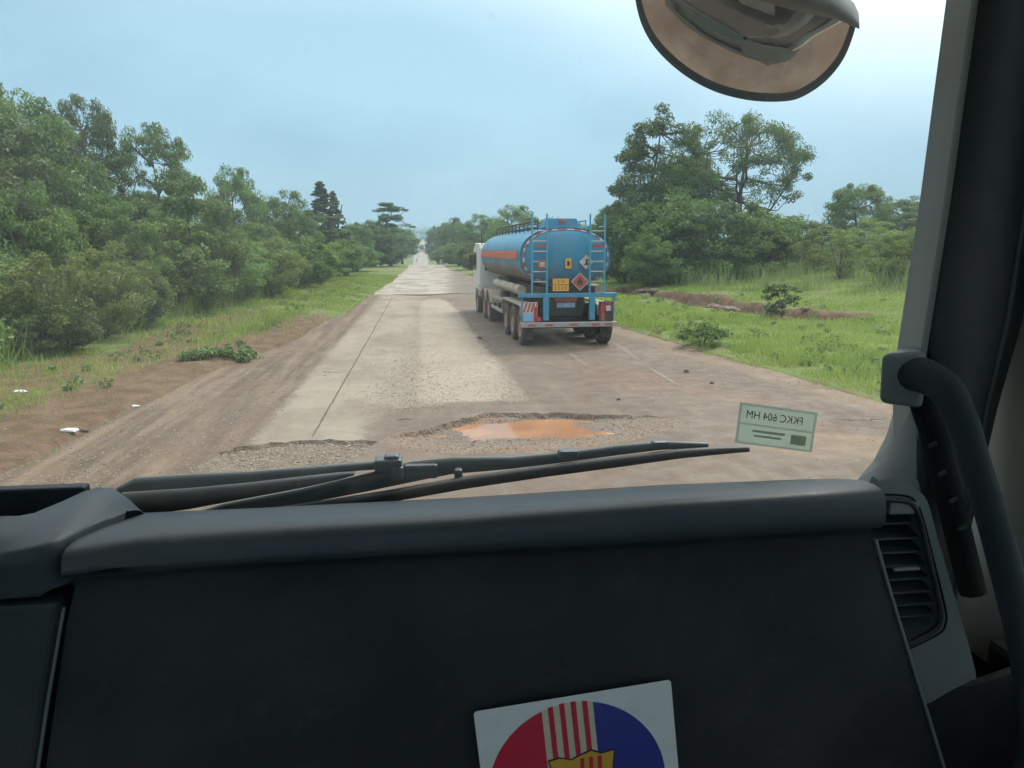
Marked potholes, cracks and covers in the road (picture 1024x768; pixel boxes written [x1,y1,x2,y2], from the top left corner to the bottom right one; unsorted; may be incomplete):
pothole [379,412,683,455]
